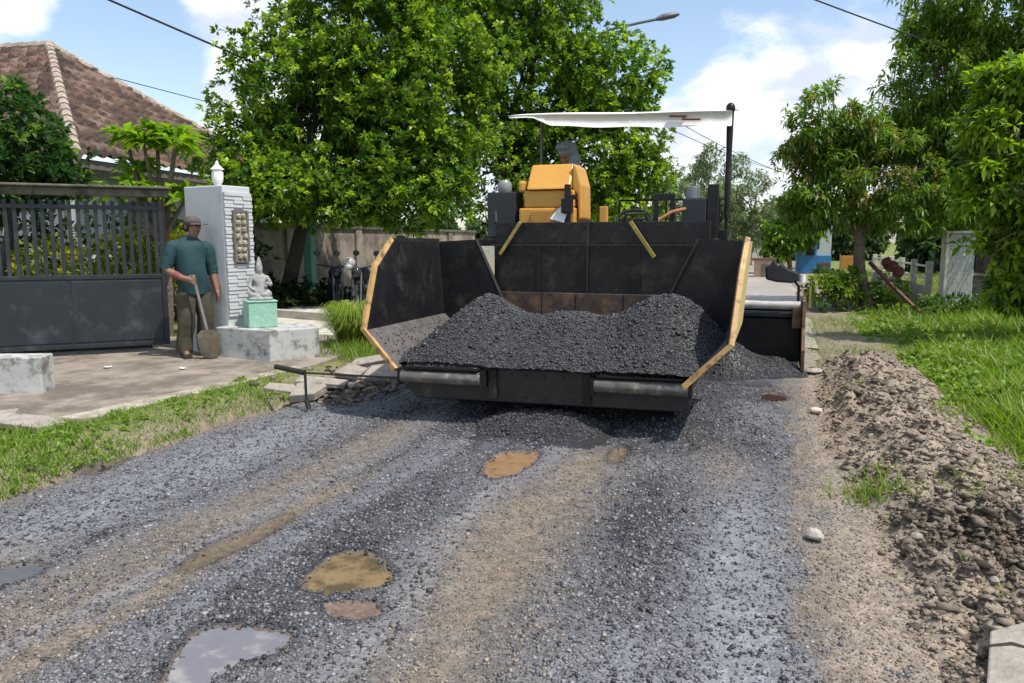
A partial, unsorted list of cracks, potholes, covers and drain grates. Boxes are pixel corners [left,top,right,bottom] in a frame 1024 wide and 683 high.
pothole [758,392,789,402]
pothole [0,562,48,586]
pothole [480,450,540,479]
pothole [158,623,298,683]
pothole [323,600,382,620]
pothole [607,447,630,463]
pothole [298,549,397,595]
